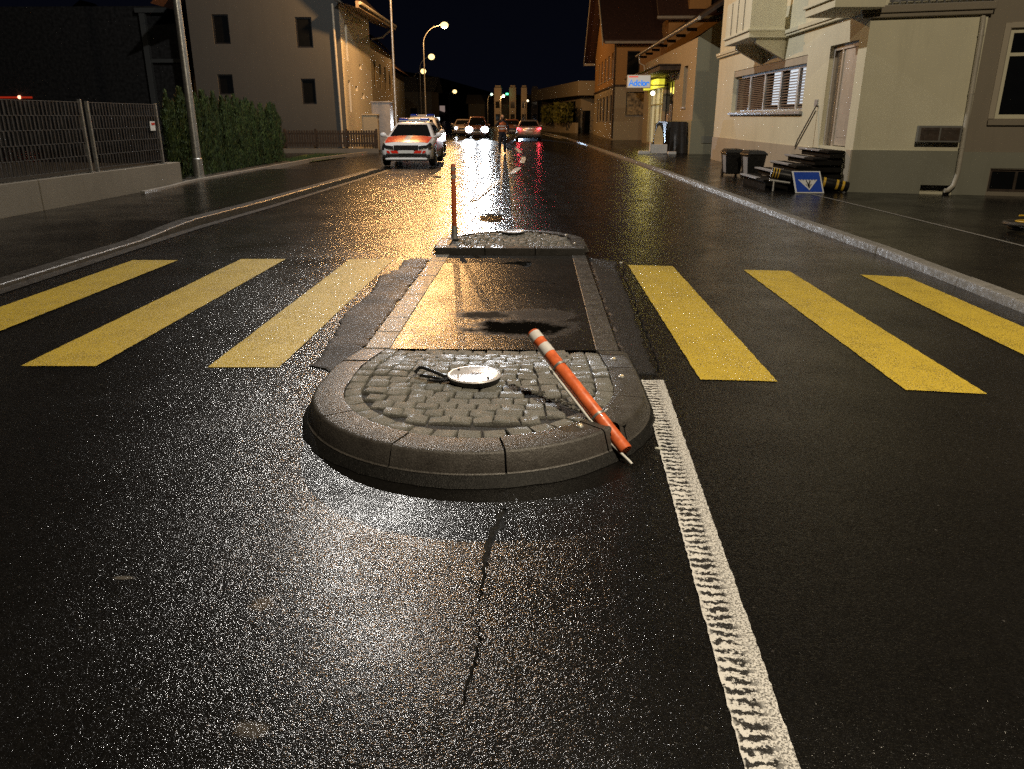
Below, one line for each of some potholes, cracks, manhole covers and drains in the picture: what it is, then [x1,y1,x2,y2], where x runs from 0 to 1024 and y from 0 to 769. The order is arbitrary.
crack [463,508,508,706]
